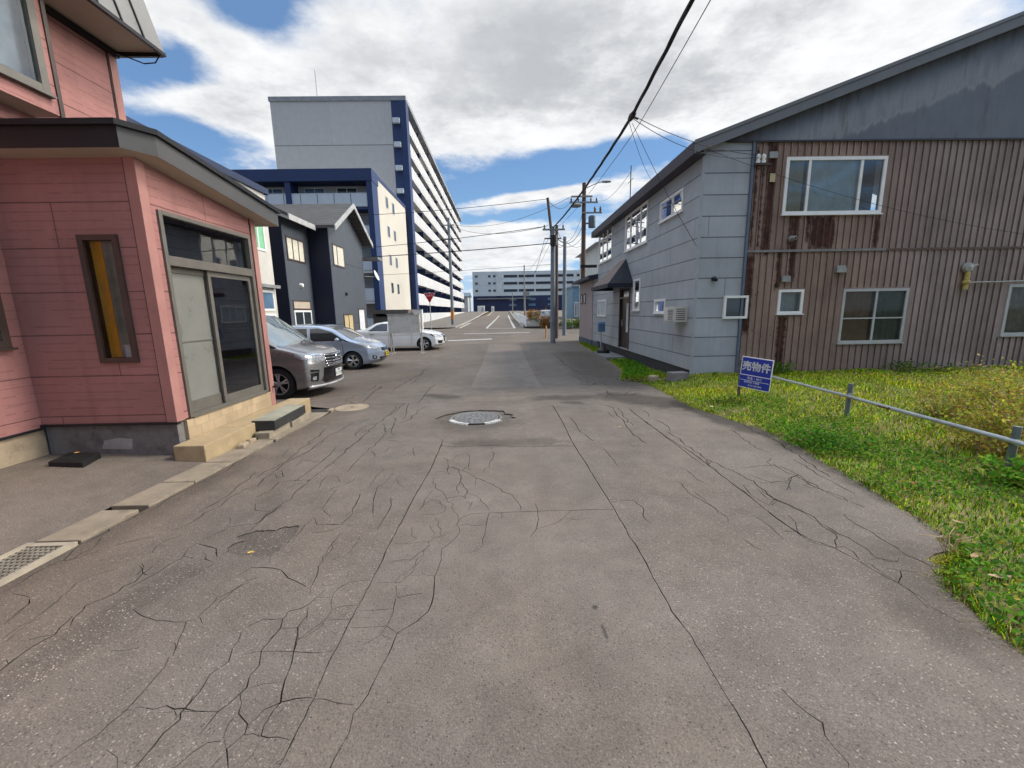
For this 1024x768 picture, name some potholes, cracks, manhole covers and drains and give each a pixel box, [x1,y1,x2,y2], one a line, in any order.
crack [0,373,426,768]
manhole cover [448,411,503,426]
crack [330,448,649,768]
drain grate [0,542,78,587]
pothole [227,525,299,556]
crack [557,356,959,768]
